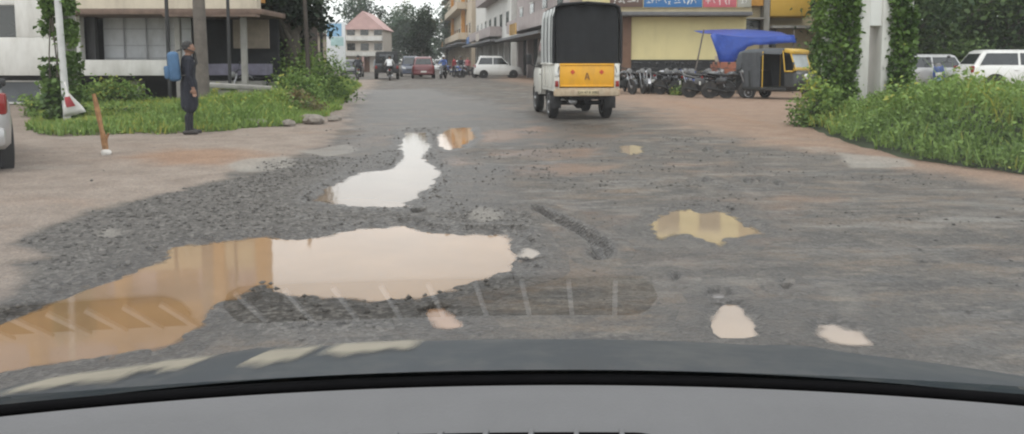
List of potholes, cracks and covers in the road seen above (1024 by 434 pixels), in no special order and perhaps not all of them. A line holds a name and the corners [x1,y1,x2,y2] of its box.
pothole [0,215,570,389]
pothole [264,129,478,219]
pothole [612,200,805,255]
pothole [425,125,499,154]
